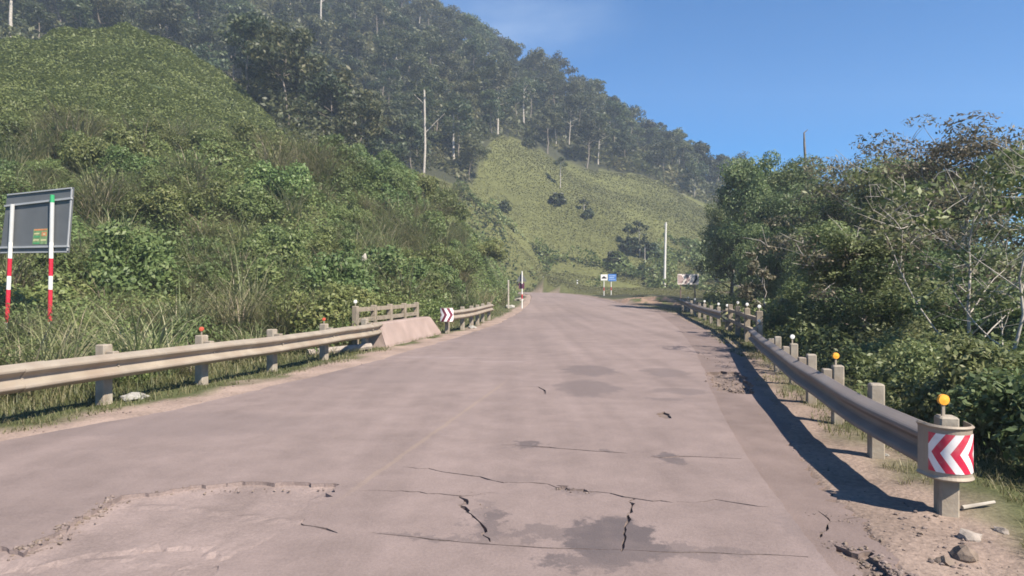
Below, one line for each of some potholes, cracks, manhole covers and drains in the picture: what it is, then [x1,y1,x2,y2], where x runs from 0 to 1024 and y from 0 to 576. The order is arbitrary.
pothole [0,482,340,576]
crack [384,467,763,551]
crack [818,511,859,539]
